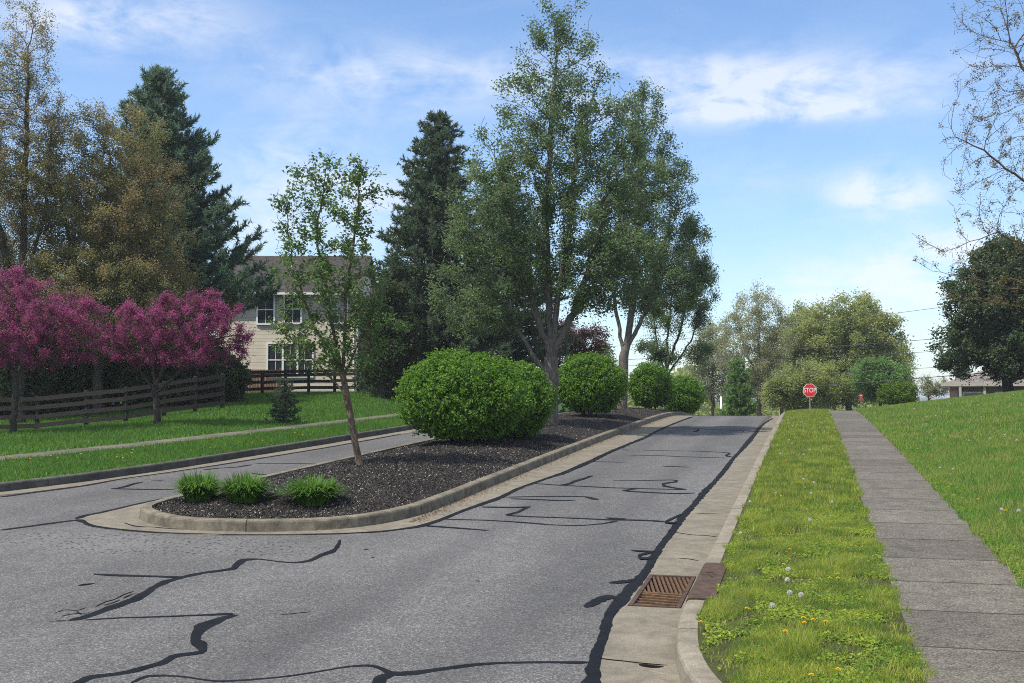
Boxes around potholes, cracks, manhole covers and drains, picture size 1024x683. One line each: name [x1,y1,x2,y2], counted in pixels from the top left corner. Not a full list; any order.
drain grate [628,562,726,608]
crack [50,583,135,622]
